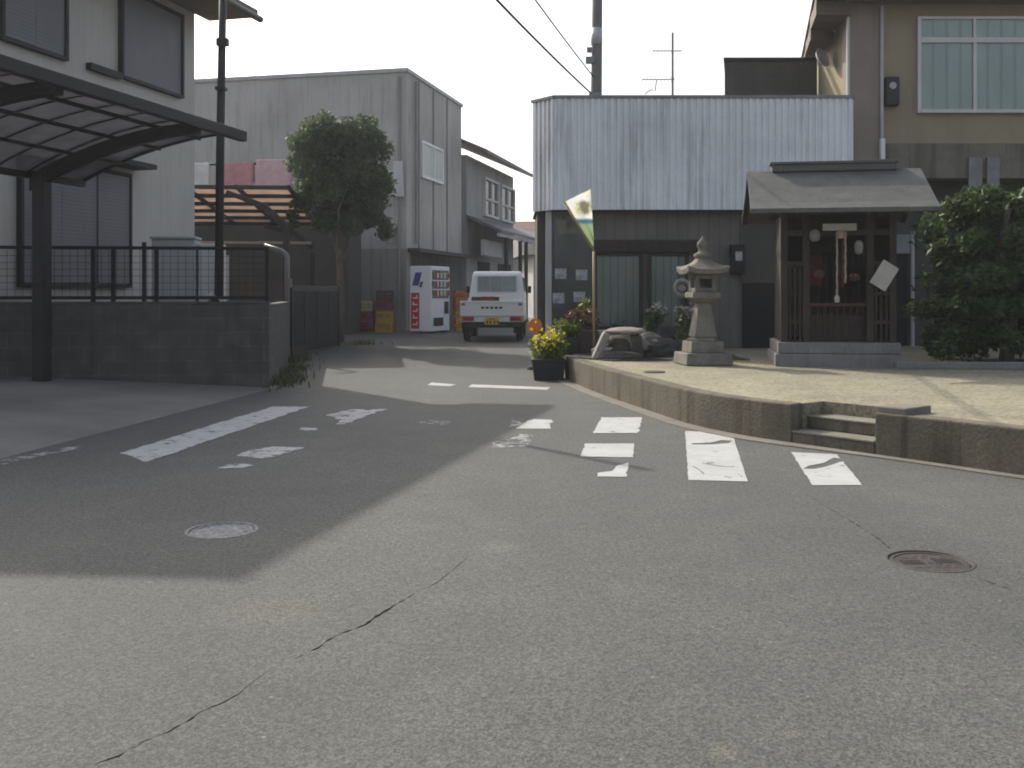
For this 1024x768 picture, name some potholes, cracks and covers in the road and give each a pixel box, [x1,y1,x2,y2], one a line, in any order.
crack [90,557,468,768]
crack [806,494,891,549]
manhole cover [185,522,259,539]
manhole cover [884,550,977,573]
